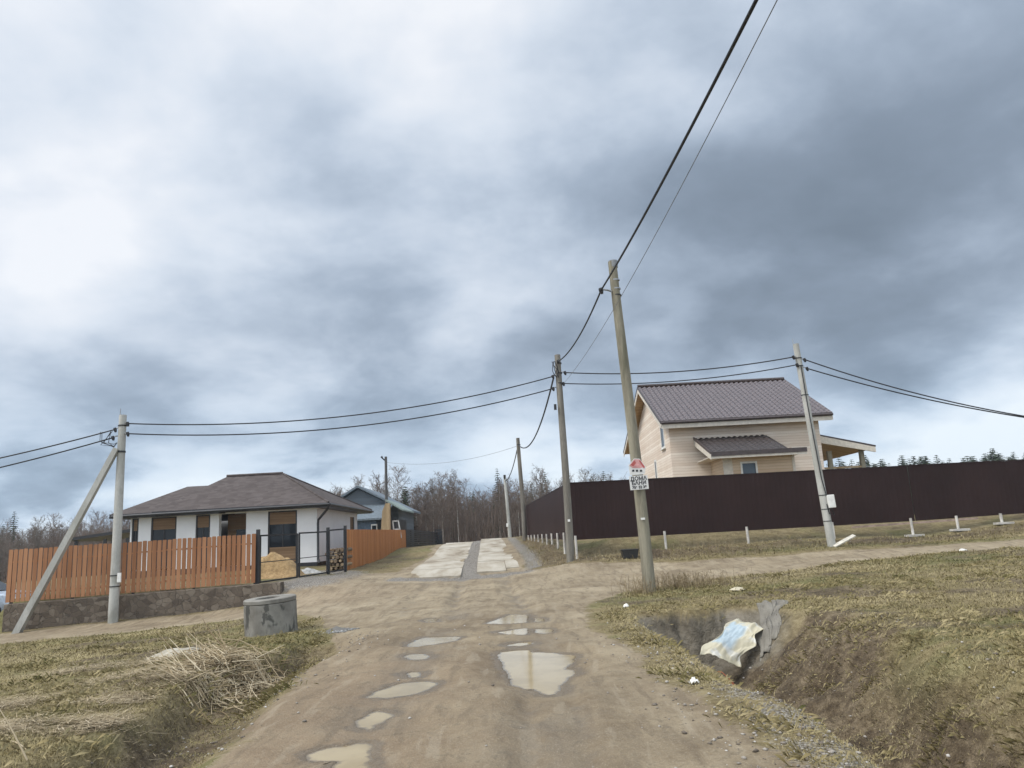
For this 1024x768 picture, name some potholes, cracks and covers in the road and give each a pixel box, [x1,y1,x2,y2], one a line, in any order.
pothole [293,740,391,768]
pothole [481,614,535,625]
pothole [491,649,585,696]
pothole [345,708,405,732]
pothole [493,628,536,636]
pothole [396,652,436,661]
pothole [401,636,467,647]
pothole [357,680,445,700]
